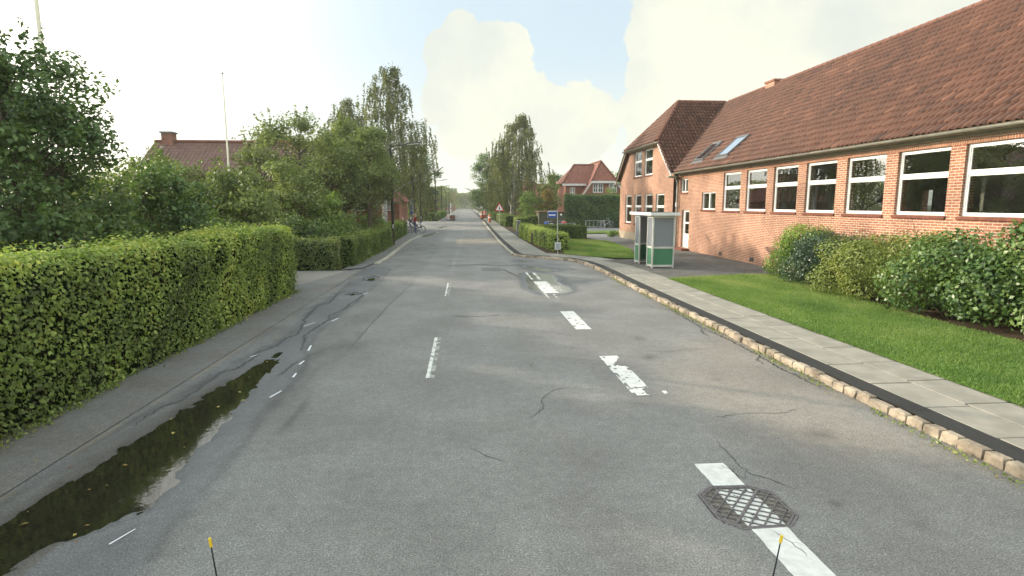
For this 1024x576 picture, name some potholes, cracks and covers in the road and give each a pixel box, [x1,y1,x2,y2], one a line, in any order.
crack [715,441,793,489]
crack [133,290,397,426]
